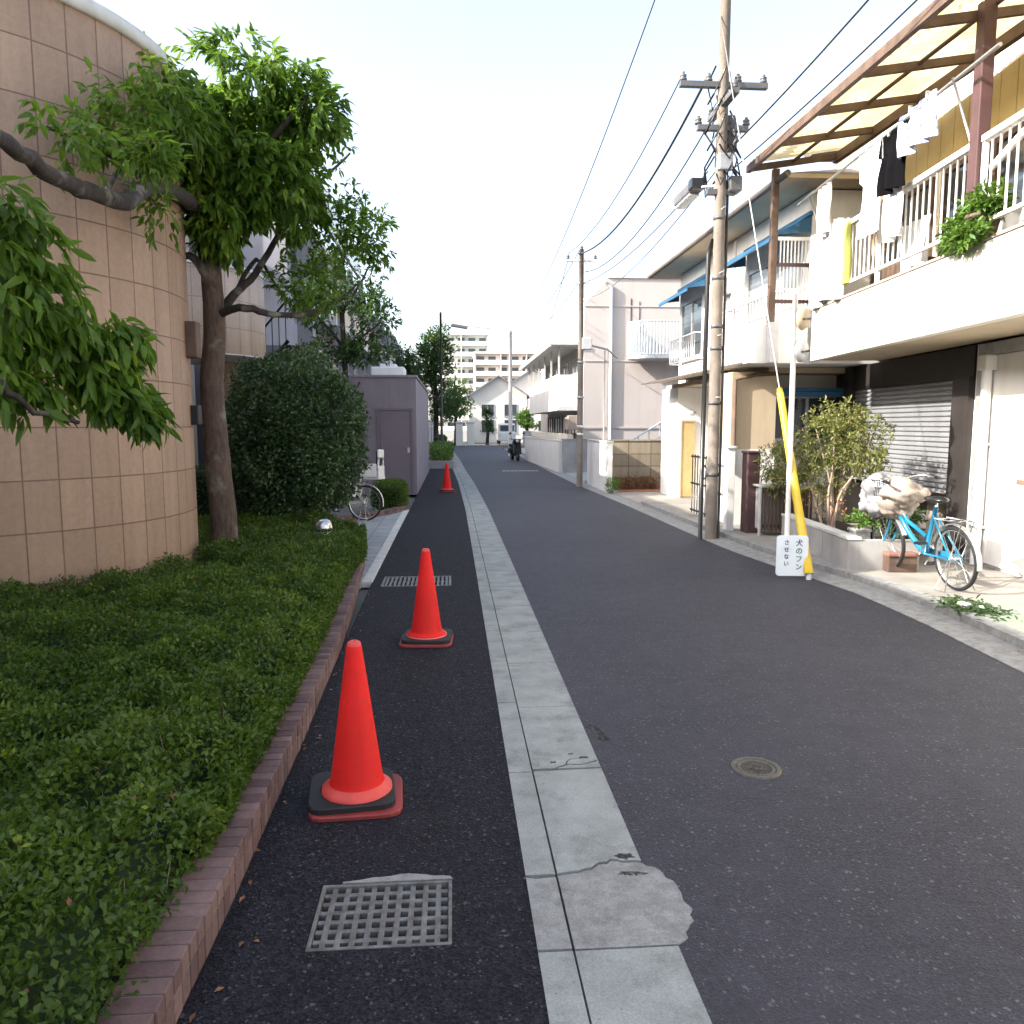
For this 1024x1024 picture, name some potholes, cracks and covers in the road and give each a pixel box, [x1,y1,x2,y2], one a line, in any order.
crack [557,853,648,884]
pothole [586,726,611,742]
manhole cover [730,757,782,780]
drain grate [305,873,453,952]
drain grate [380,576,452,587]
